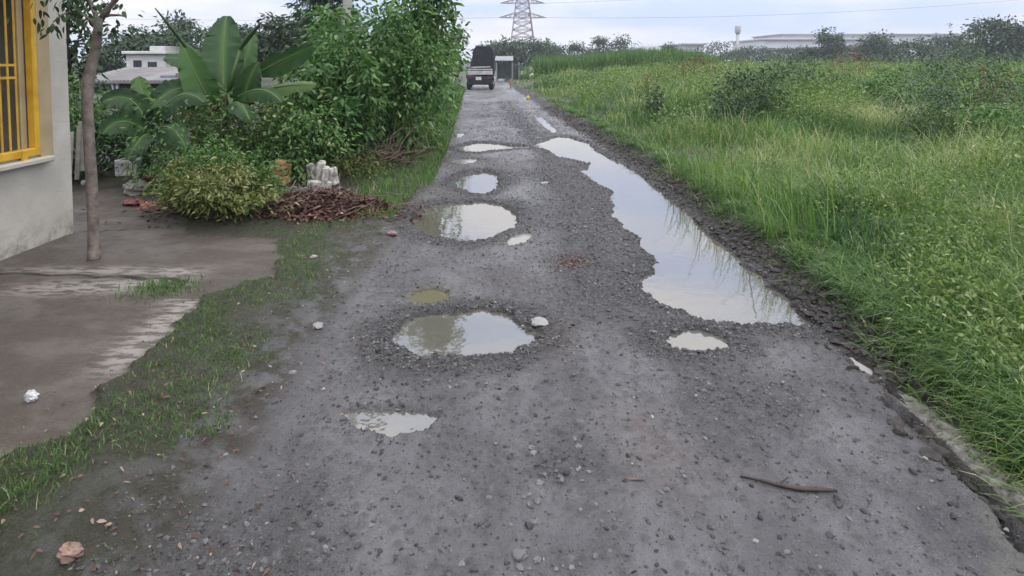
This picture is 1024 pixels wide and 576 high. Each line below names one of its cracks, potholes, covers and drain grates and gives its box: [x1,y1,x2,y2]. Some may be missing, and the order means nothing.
pothole [534,116,559,133]
pothole [403,283,456,304]
pothole [452,169,504,194]
pothole [333,400,445,439]
pothole [654,322,733,353]
pothole [529,135,828,328]
pothole [383,304,548,359]
pothole [501,230,539,246]
pothole [405,198,520,243]
pothole [455,141,532,152]
